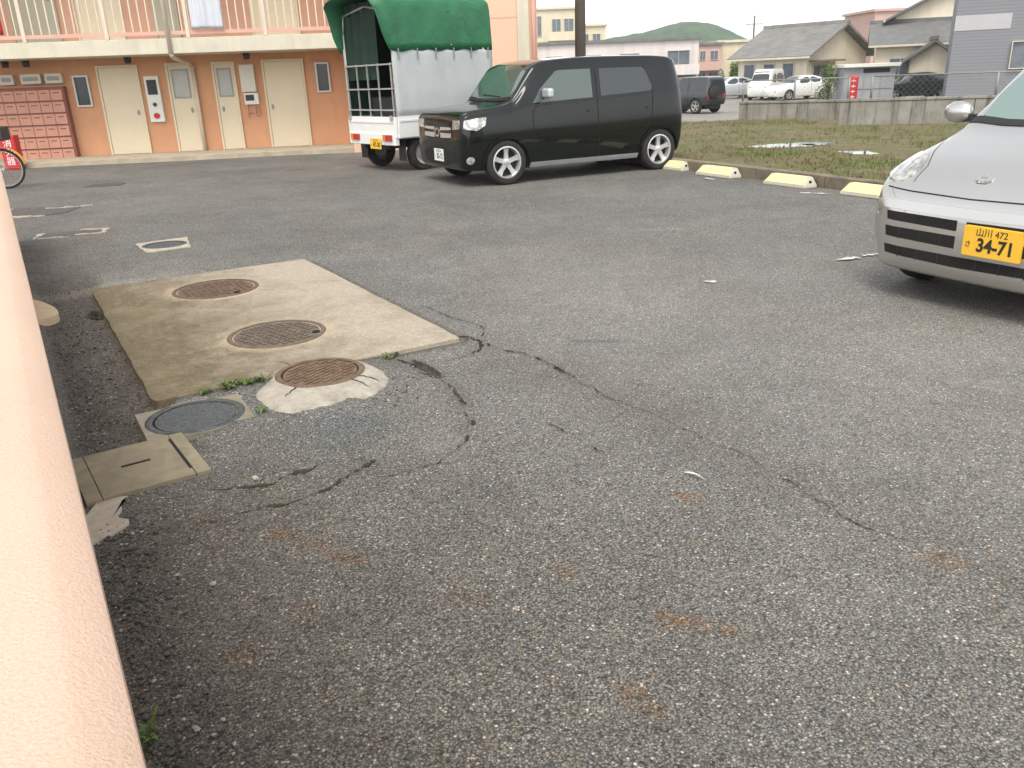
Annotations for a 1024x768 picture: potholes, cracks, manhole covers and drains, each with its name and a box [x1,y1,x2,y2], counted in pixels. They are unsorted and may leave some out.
manhole cover [142,241,187,249]
manhole cover [275,357,365,388]
manhole cover [146,399,244,435]
manhole cover [172,279,259,299]
crack [159,380,475,530]
crack [393,305,916,543]
manhole cover [227,320,326,349]
